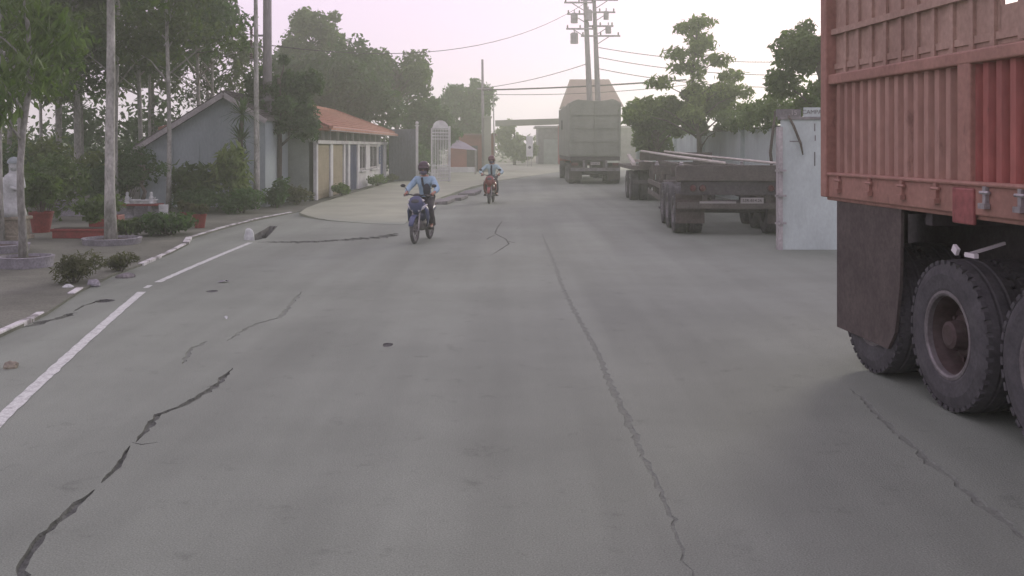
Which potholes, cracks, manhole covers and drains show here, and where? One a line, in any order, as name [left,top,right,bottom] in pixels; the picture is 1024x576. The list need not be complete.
pothole [254,226,277,240]
crack [542,234,694,576]
crack [16,292,301,576]
crack [850,389,1024,540]
